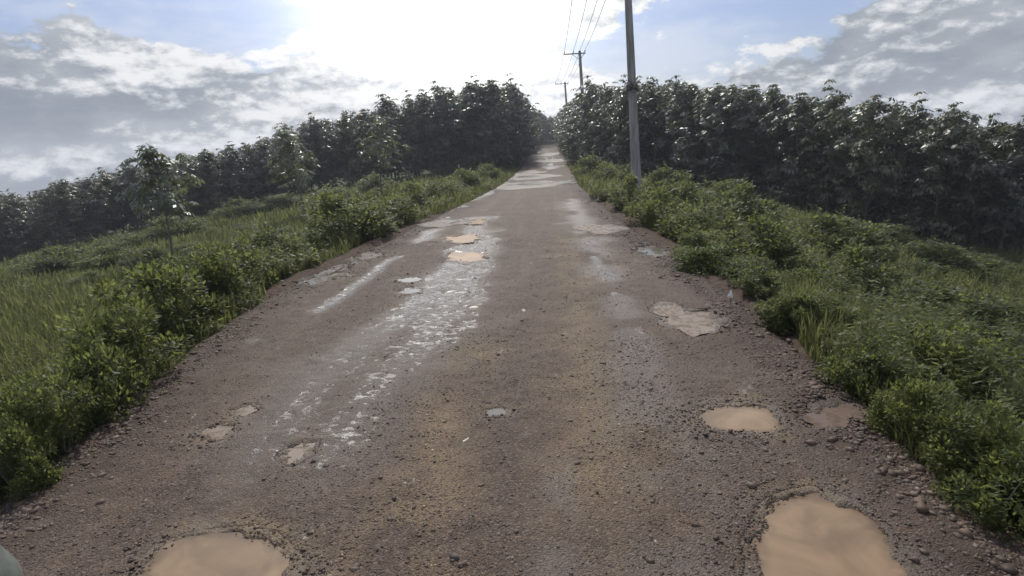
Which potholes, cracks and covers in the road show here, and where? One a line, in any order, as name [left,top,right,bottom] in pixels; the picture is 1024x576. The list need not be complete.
pothole [480,407,514,419]
pothole [649,301,730,338]
pothole [188,422,240,443]
pothole [570,224,632,235]
pothole [395,287,423,295]
pothole [395,275,425,283]
pothole [225,403,262,418]
pothole [438,252,492,265]
pothole [428,233,485,246]
pothole [741,486,919,576]
pothole [689,401,793,437]
pothole [274,439,321,467]
